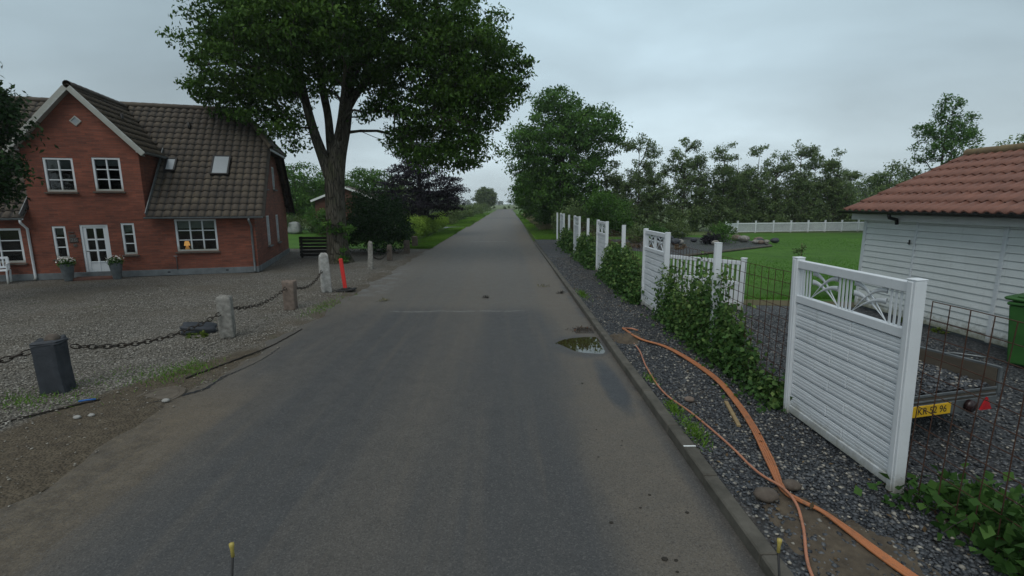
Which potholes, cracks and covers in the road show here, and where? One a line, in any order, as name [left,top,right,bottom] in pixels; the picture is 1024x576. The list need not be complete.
crack [149,347,280,403]
